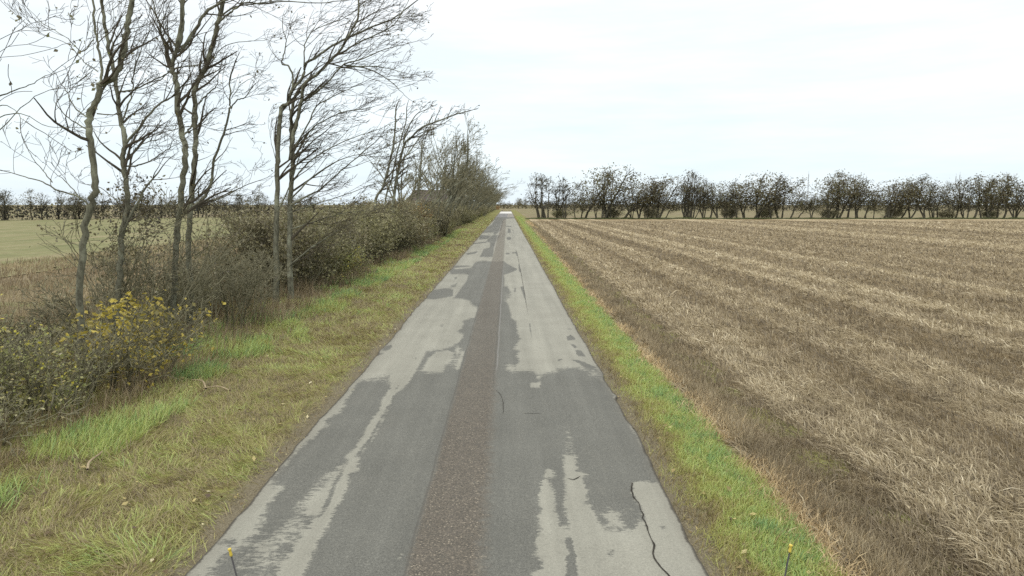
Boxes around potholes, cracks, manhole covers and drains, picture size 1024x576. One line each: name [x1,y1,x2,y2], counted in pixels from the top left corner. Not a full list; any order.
crack [631,483,670,576]
